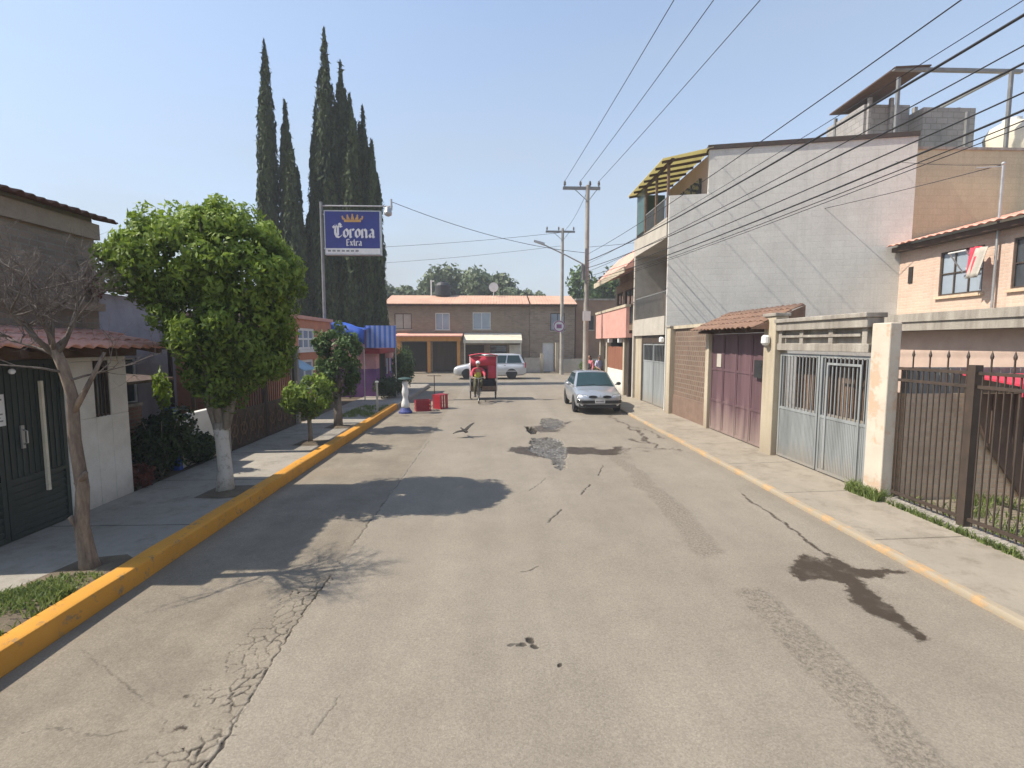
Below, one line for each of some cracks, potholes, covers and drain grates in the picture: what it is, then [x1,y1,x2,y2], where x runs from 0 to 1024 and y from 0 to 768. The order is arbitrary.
pothole [522,437,572,472]
crack [0,543,373,768]
crack [509,561,550,577]
crack [521,464,610,526]
pothole [538,418,567,430]
